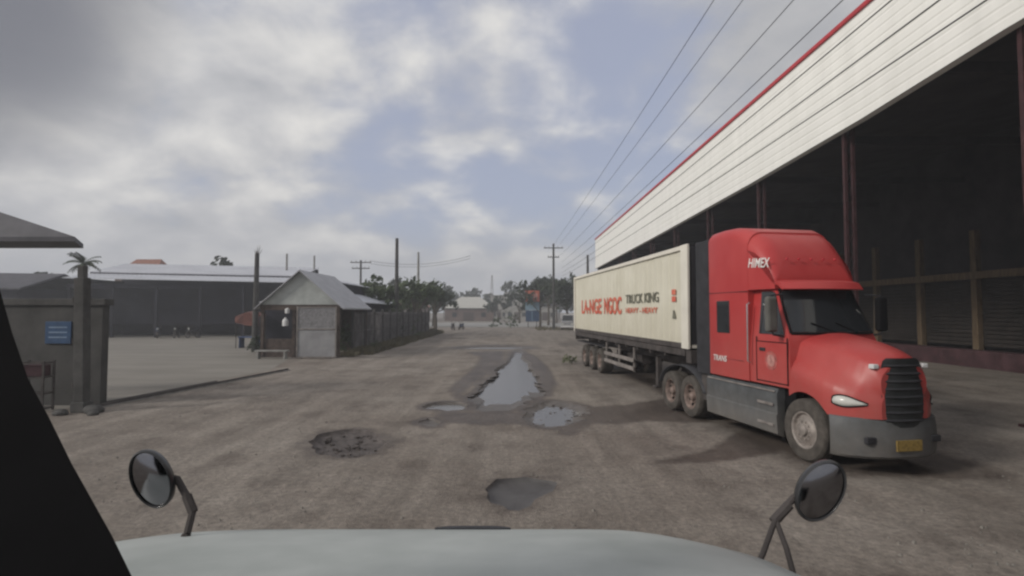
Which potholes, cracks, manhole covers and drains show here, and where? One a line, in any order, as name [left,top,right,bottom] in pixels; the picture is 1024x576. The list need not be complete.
pothole [422,402,468,411]
pothole [523,400,590,428]
pothole [485,477,558,511]
pothole [467,350,547,411]
pothole [308,429,386,458]
